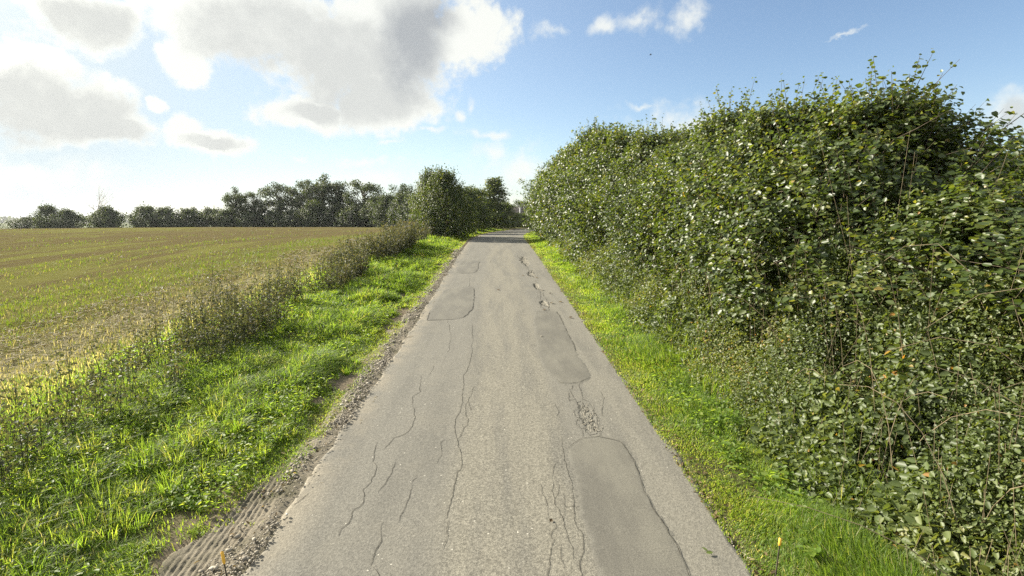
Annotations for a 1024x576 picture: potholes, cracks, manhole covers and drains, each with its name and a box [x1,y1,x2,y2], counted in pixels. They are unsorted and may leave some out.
crack [544,385,603,576]
crack [437,331,473,545]
crack [339,369,433,533]
